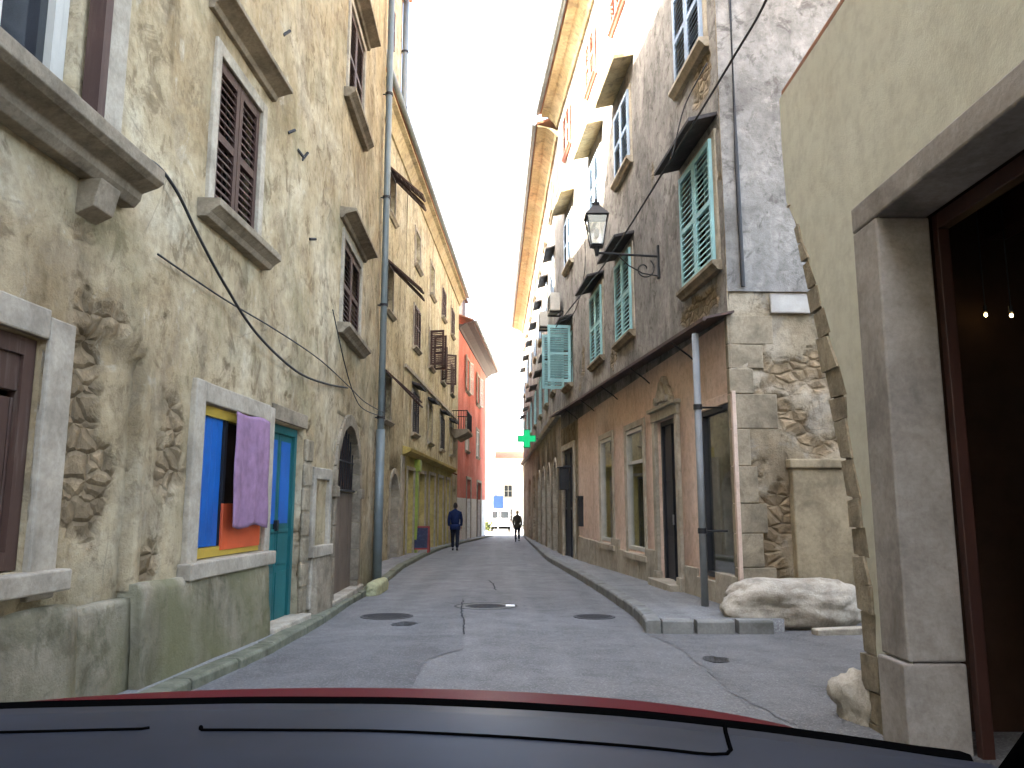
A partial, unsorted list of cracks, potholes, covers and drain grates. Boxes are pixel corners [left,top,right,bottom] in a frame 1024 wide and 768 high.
manhole cover [454,602,517,610]
